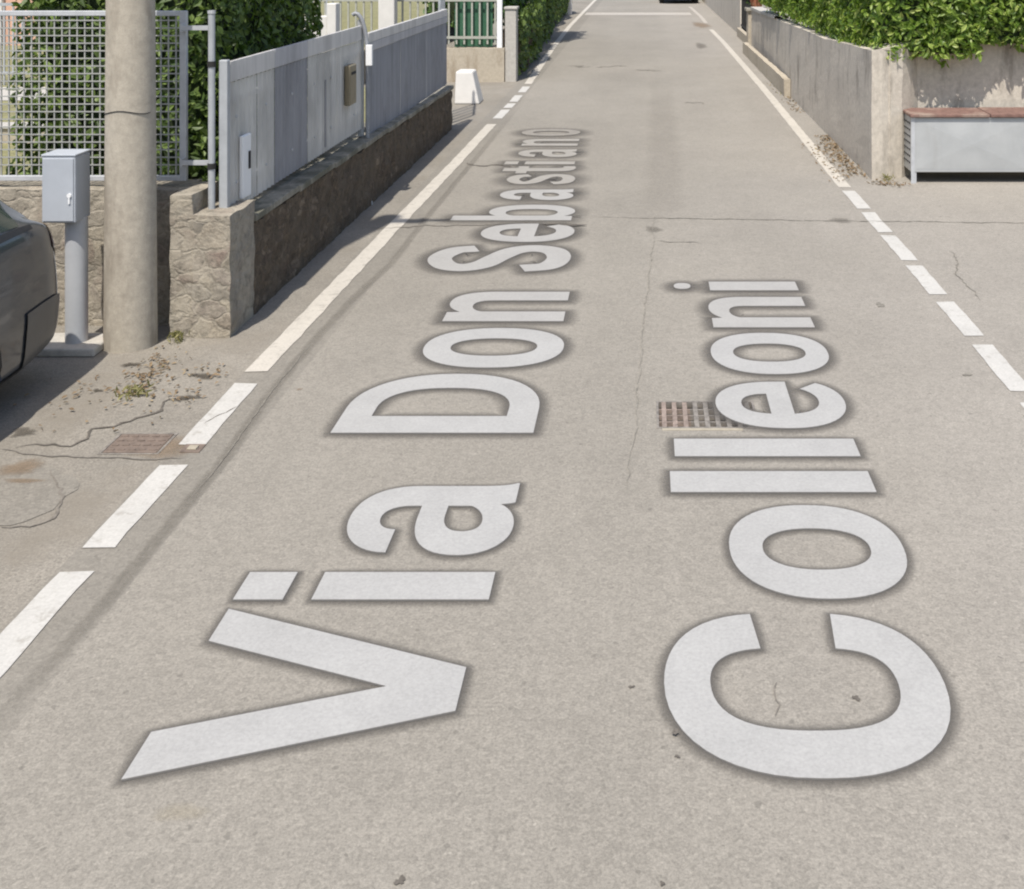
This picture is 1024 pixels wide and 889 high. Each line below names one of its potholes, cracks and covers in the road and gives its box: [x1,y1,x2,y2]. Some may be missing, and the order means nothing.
crack [18,396,170,447]
crack [626,223,699,481]
crack [954,253,979,298]
drain grate [656,401,760,431]
crack [7,471,65,528]
